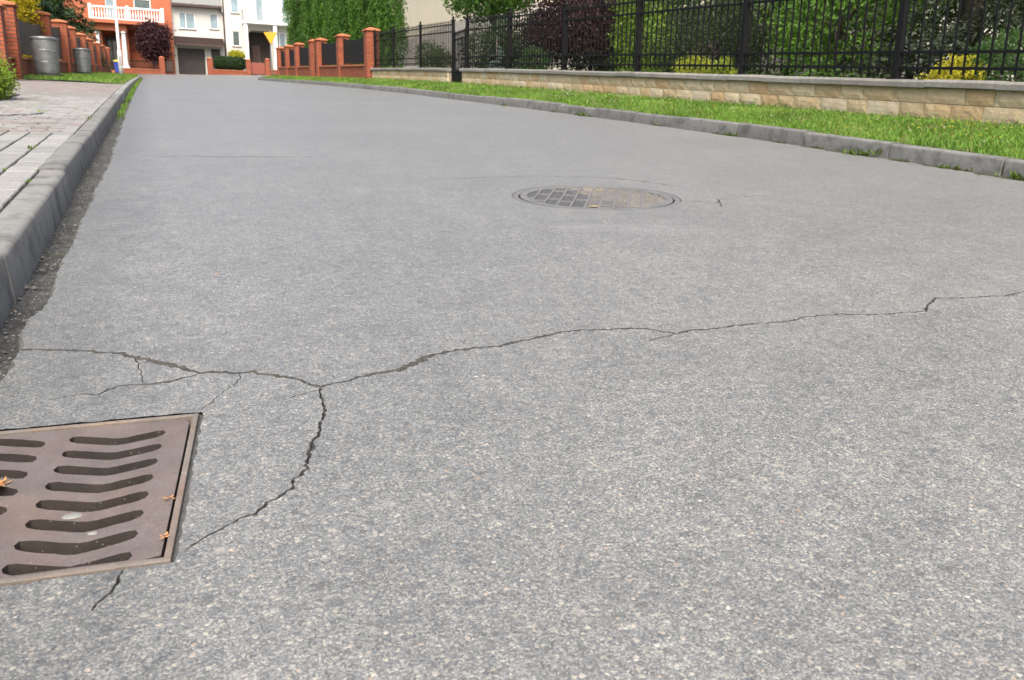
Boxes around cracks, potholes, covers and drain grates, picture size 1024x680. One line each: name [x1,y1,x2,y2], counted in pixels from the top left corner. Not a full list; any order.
crack [91,570,123,611]
drain grate [0,412,204,587]
crack [22,291,1024,552]
manhole cover [512,185,681,211]
